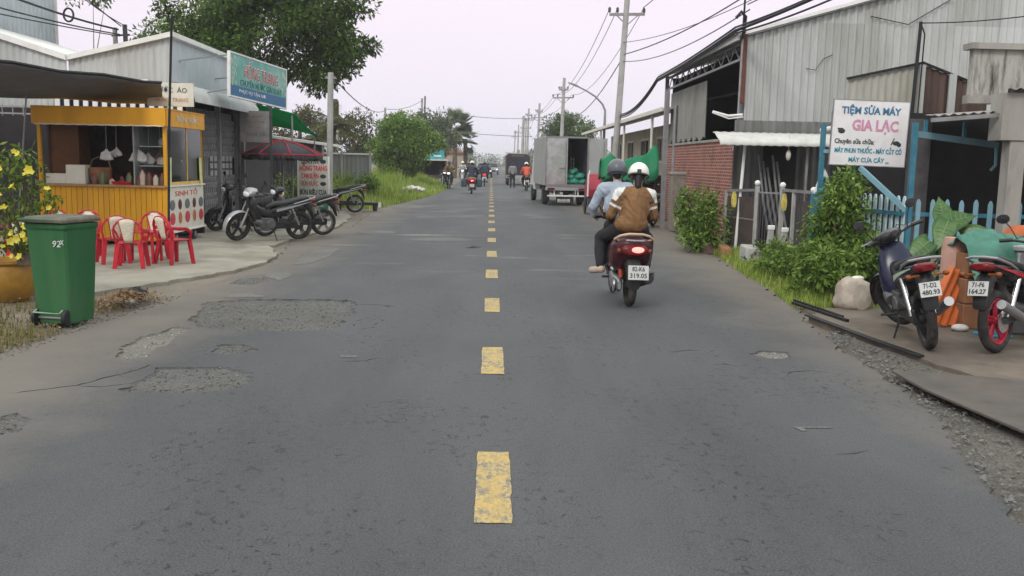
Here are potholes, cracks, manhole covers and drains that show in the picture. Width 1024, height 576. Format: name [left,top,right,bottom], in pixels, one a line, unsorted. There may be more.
pothole [0,413,32,436]
pothole [118,366,253,393]
pothole [187,299,358,332]
pothole [211,344,258,355]
pothole [115,326,192,360]
pothole [750,350,790,359]
crack [9,364,152,394]
